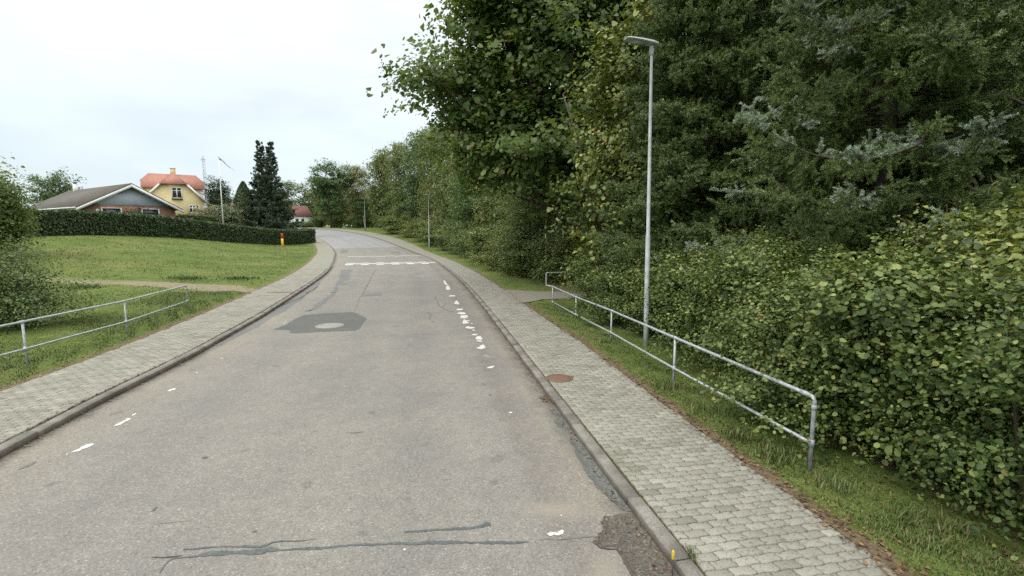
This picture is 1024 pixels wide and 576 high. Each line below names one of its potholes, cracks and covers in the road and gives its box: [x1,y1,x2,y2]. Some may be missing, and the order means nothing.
manhole cover [546,374,573,383]
